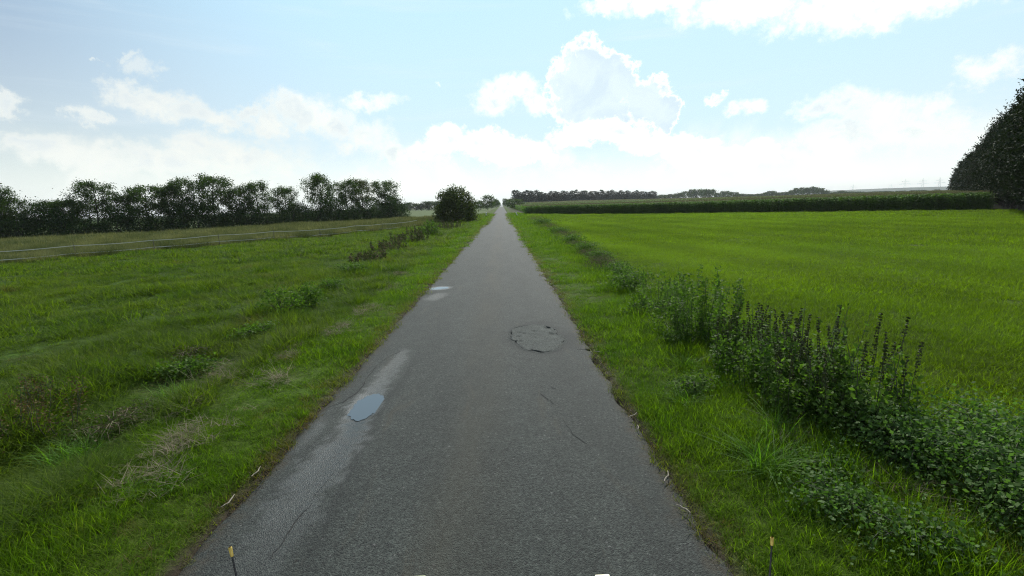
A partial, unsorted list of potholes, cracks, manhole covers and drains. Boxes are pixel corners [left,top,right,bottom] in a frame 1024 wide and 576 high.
crack [271,470,336,558]
